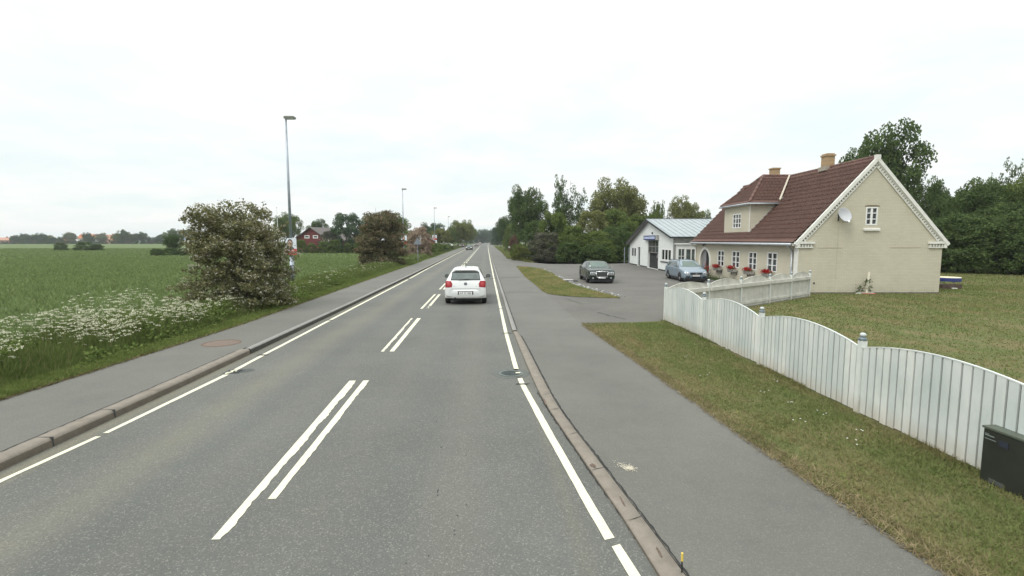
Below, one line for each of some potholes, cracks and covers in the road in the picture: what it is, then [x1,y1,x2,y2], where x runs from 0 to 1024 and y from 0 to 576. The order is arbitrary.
manhole cover [492,369,530,379]
manhole cover [201,339,242,347]
